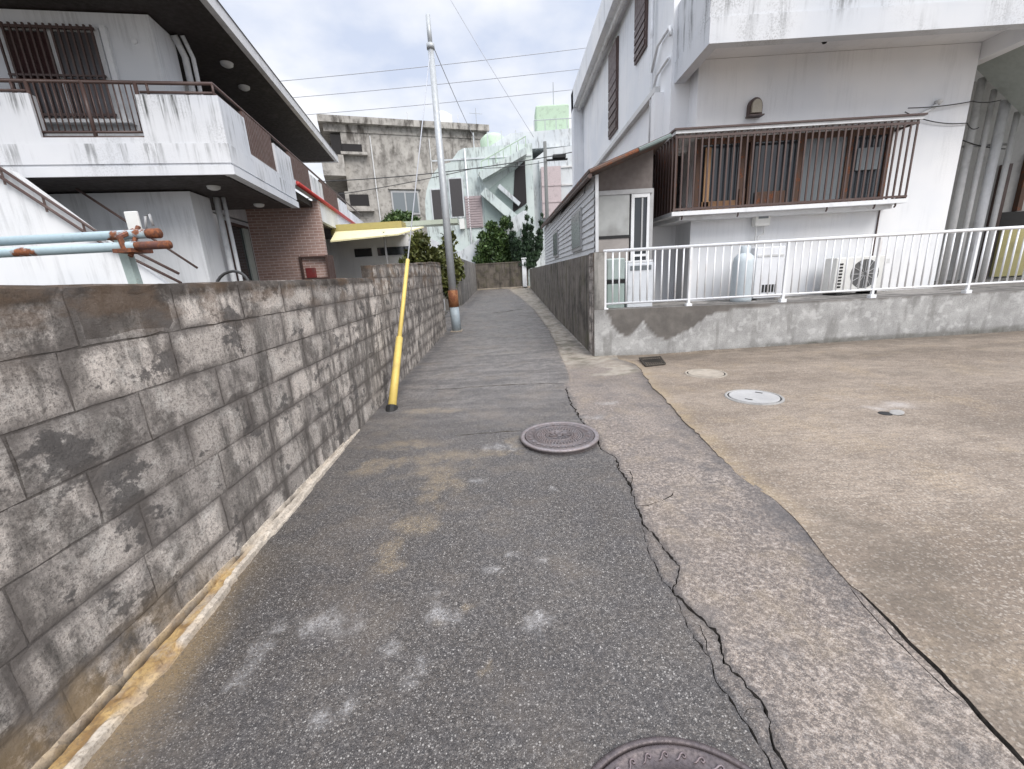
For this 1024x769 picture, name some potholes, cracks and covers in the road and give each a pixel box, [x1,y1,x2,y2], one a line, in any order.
manhole cover [591,736,752,769]
manhole cover [685,369,728,379]
manhole cover [724,389,785,405]
crack [435,383,788,769]
manhole cover [520,421,599,455]
drain grate [639,356,666,367]
